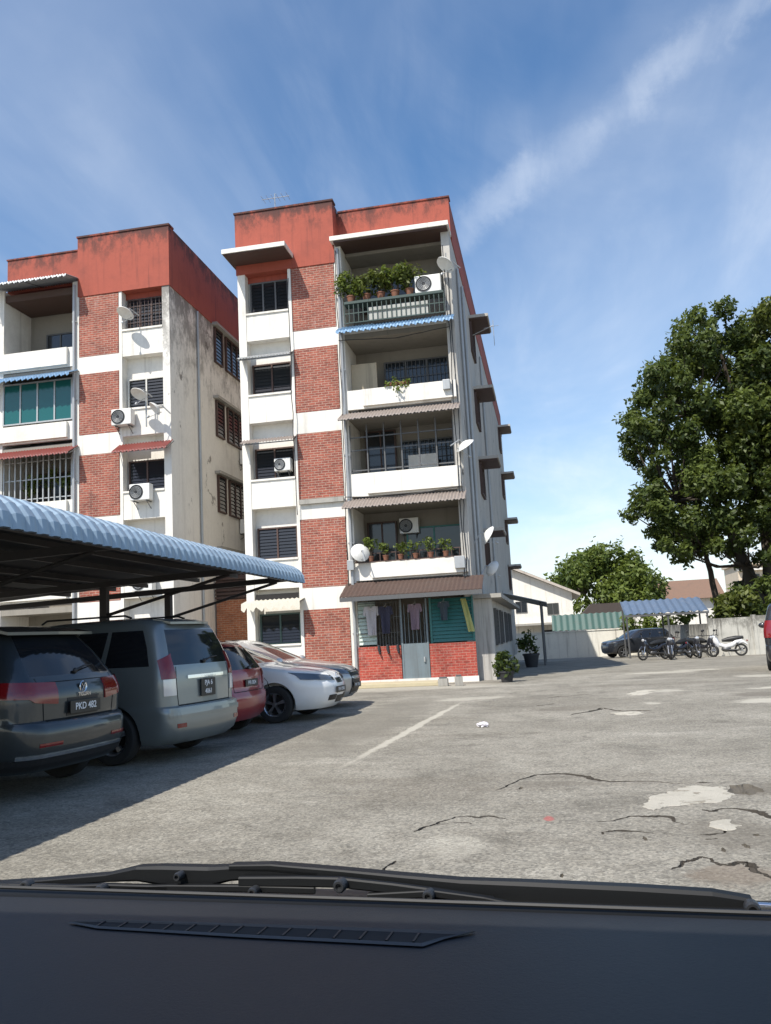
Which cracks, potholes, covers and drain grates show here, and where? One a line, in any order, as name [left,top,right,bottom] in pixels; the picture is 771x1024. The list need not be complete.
crack [598,808,771,879]
crack [414,815,508,832]
crack [497,773,709,790]
pothole [728,784,765,795]
crack [537,695,649,715]
